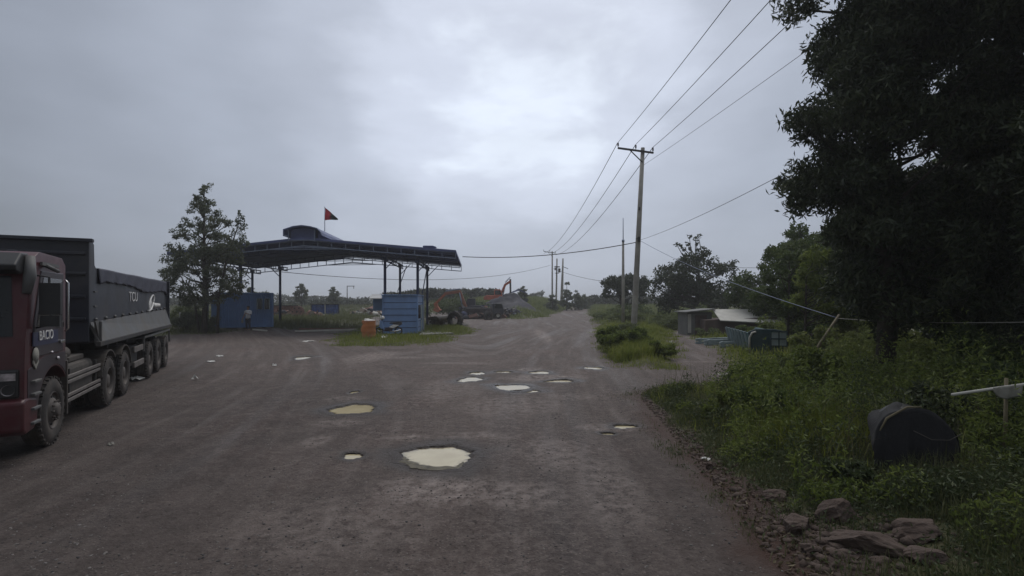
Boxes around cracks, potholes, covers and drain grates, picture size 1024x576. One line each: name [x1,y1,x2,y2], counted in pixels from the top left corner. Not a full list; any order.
pothole [318,402,384,416]
pothole [599,422,655,431]
pothole [386,441,486,472]
pothole [332,449,375,464]
pothole [489,384,539,392]
